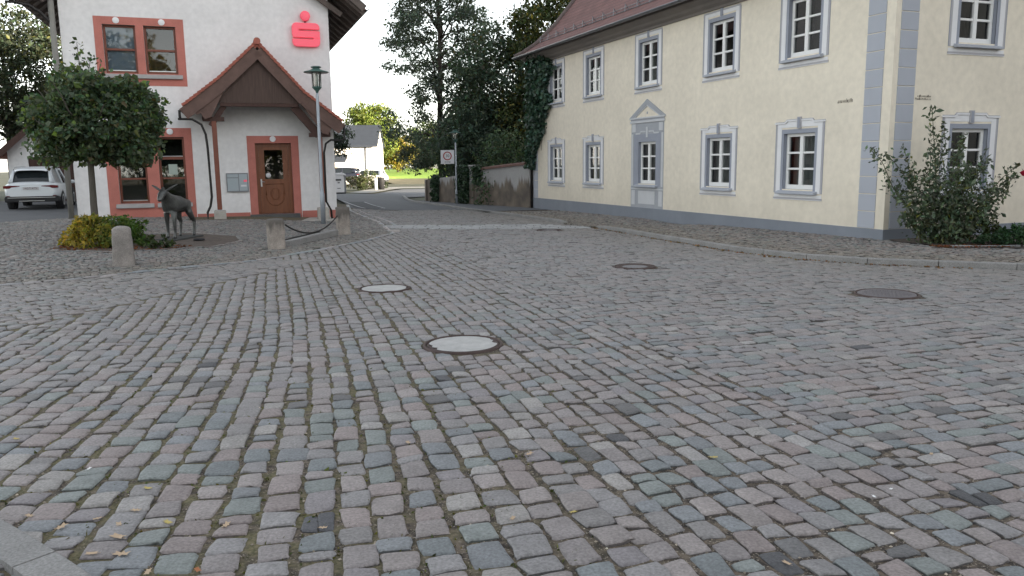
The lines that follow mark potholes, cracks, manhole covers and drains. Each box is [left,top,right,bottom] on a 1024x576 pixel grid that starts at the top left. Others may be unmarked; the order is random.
manhole cover [854,288,921,300]
manhole cover [358,284,410,294]
manhole cover [423,335,503,355]
